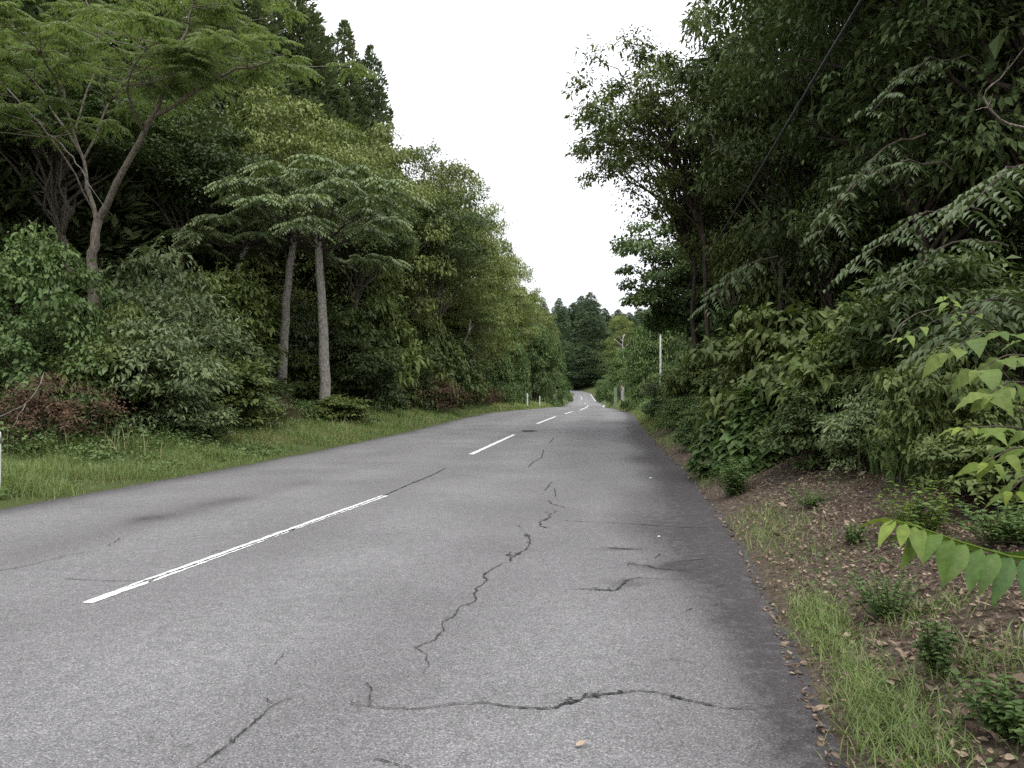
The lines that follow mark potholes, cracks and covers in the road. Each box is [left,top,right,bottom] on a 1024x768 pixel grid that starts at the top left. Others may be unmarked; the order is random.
crack [193,694,304,768]
crack [415,484,681,674]
crack [569,547,706,590]
crack [350,681,752,711]
